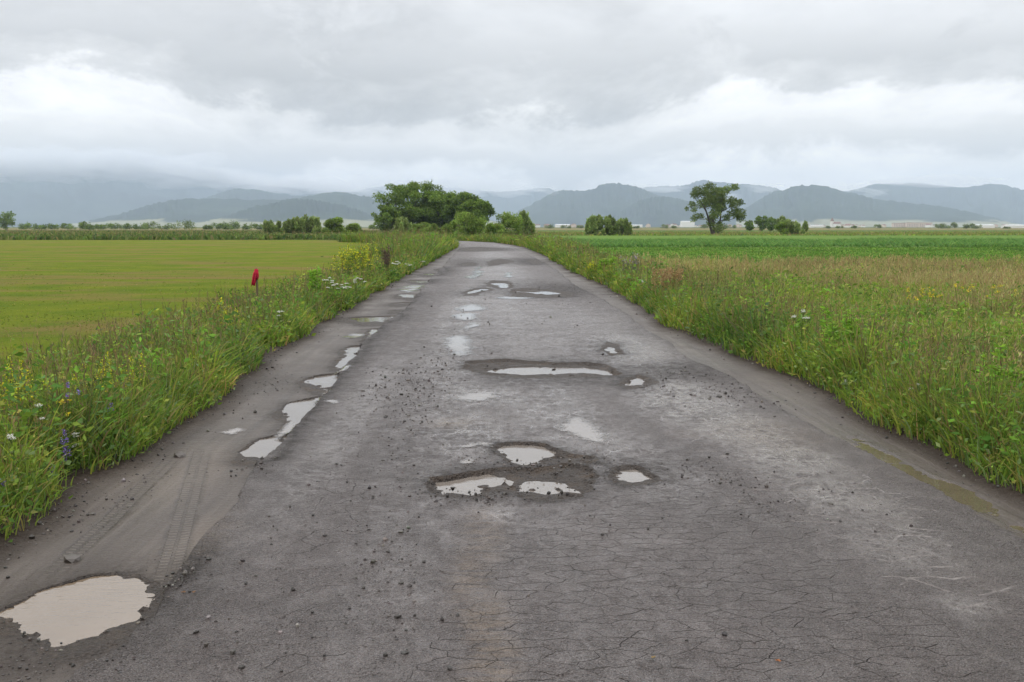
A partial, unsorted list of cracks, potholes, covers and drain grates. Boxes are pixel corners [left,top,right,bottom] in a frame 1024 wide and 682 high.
pothole [485,280,514,289]
pothole [508,288,575,298]
pothole [424,463,600,502]
pothole [230,433,290,467]
pothole [462,287,493,296]
pothole [327,345,360,374]
crack [264,653,343,677]
pothole [599,341,626,356]
pothole [608,465,663,486]
pothole [0,571,164,663]
